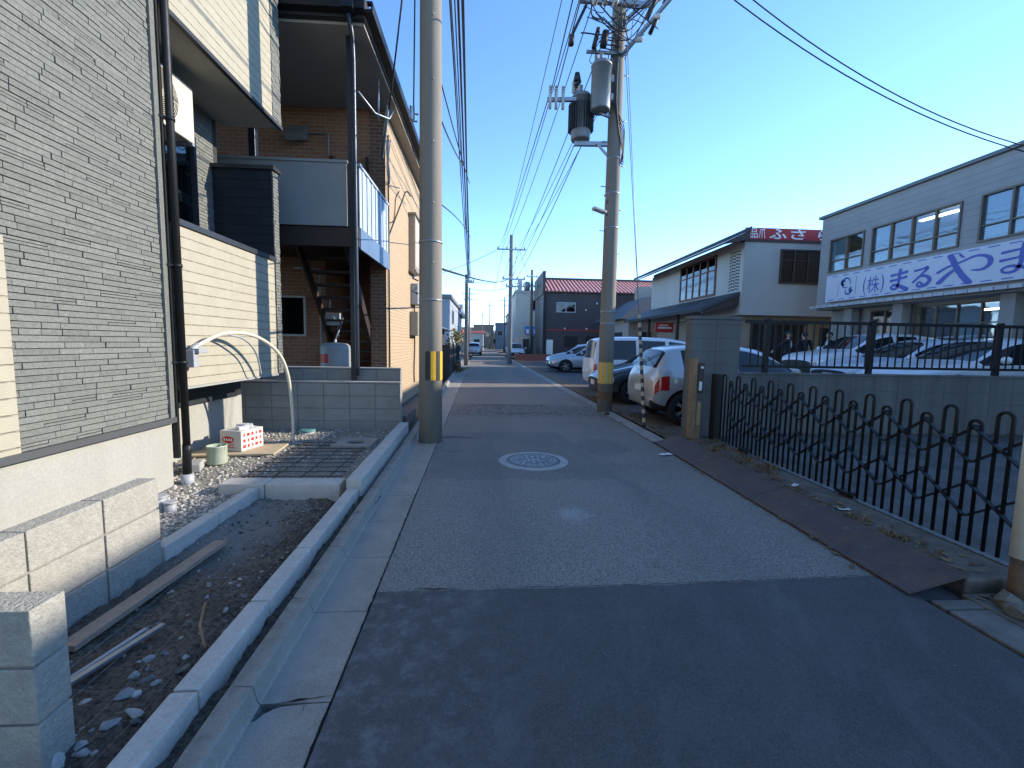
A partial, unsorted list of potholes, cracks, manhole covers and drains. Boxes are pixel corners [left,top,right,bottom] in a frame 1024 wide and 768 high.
manhole cover [498,452,568,471]
